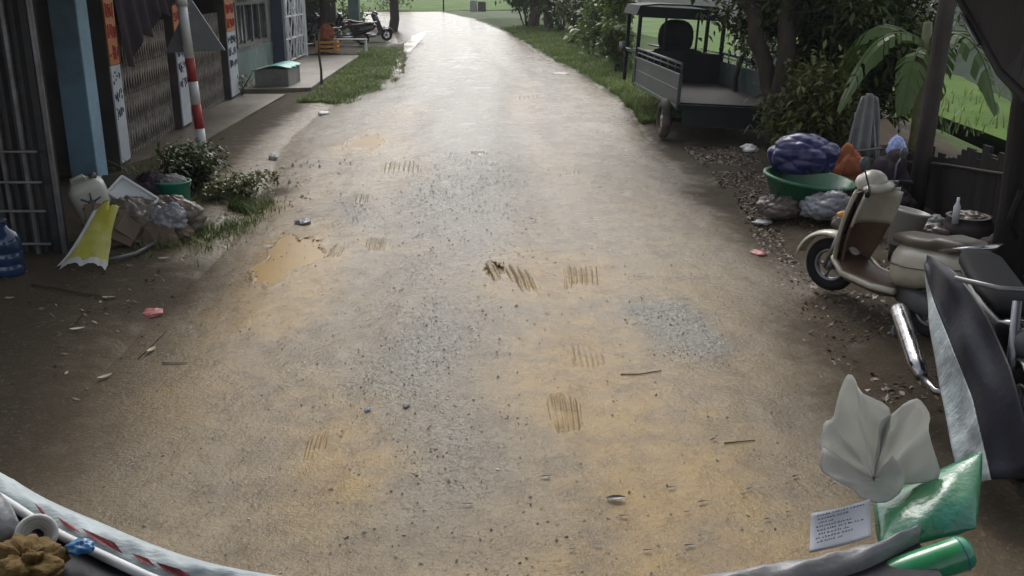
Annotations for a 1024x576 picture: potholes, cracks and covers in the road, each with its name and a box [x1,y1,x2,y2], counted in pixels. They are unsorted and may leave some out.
pothole [246,233,332,291]
pothole [341,132,388,150]
